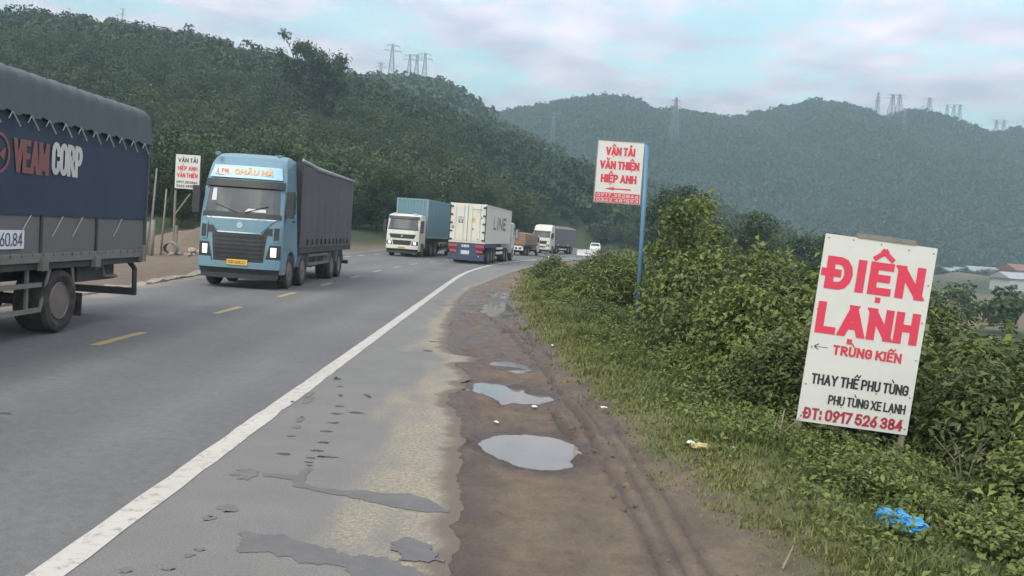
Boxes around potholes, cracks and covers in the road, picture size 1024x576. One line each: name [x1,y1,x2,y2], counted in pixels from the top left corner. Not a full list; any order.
pothole [464,424,608,475]
pothole [468,298,541,325]
pothole [462,376,571,407]
pothole [477,356,545,374]
